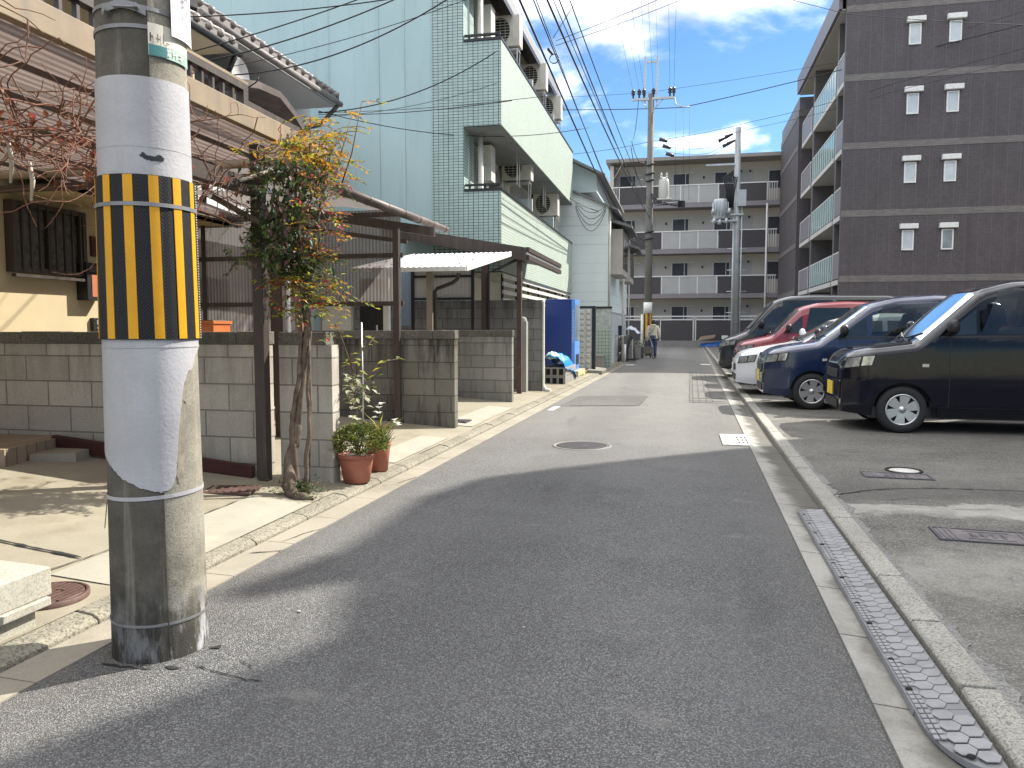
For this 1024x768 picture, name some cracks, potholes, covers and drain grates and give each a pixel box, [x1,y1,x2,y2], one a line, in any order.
manhole cover [553,441,612,450]
crack [833,488,1018,510]
manhole cover [928,526,1024,546]
crack [102,645,261,681]
manhole cover [37,581,91,611]
drain grate [203,485,262,495]
manhole cover [860,471,935,481]
